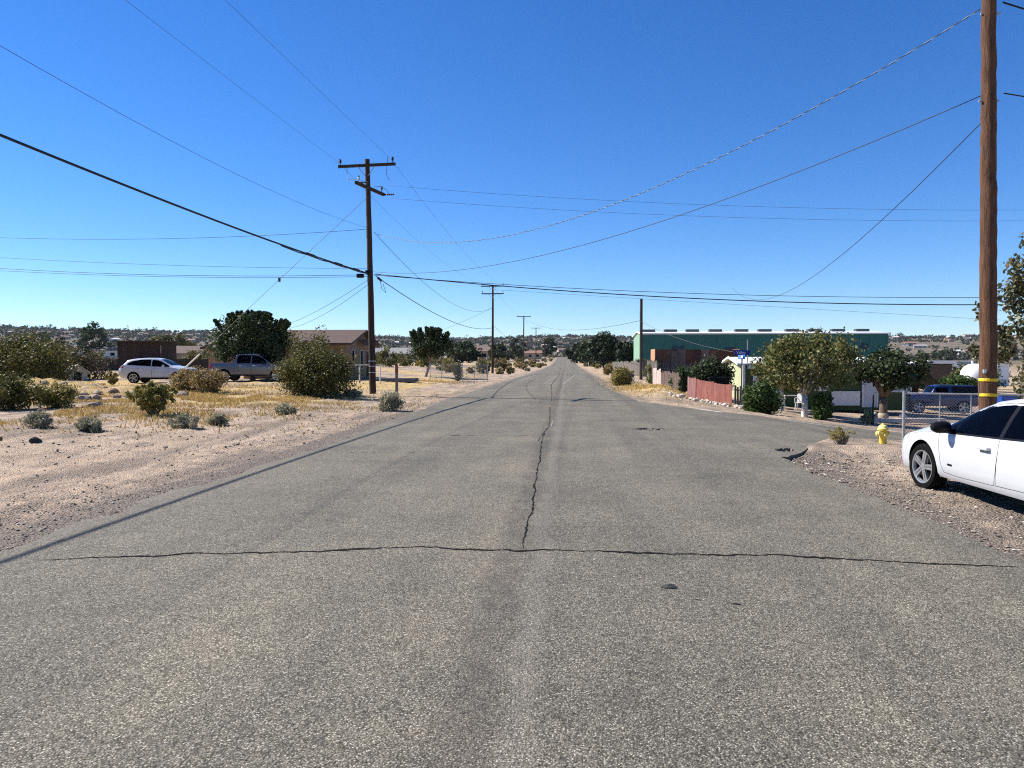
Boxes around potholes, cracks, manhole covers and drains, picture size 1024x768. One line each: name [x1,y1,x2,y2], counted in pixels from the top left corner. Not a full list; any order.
crack [51,372,1016,567]
